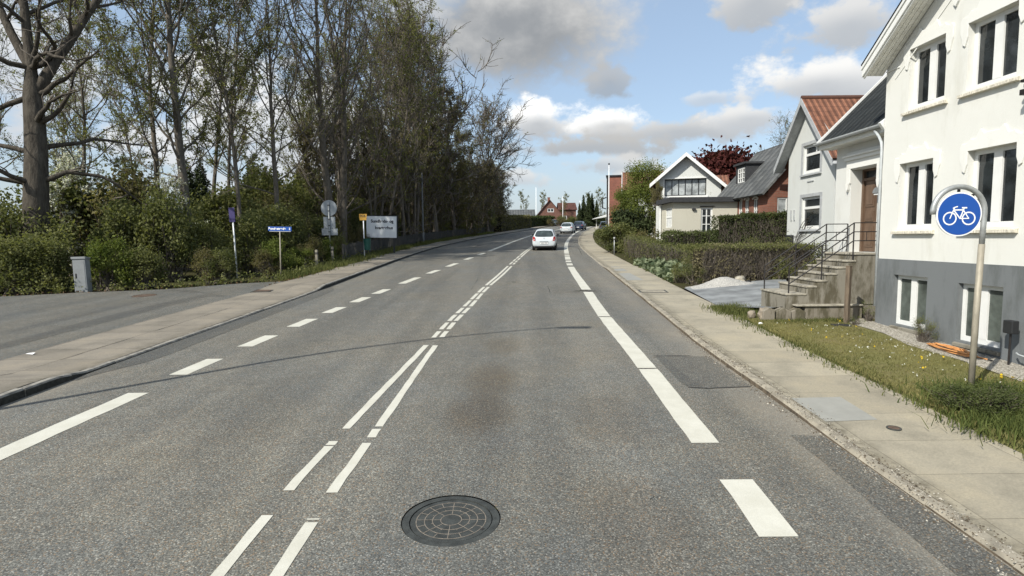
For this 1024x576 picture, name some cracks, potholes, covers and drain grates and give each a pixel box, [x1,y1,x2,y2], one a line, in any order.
manhole cover [401,496,501,547]
